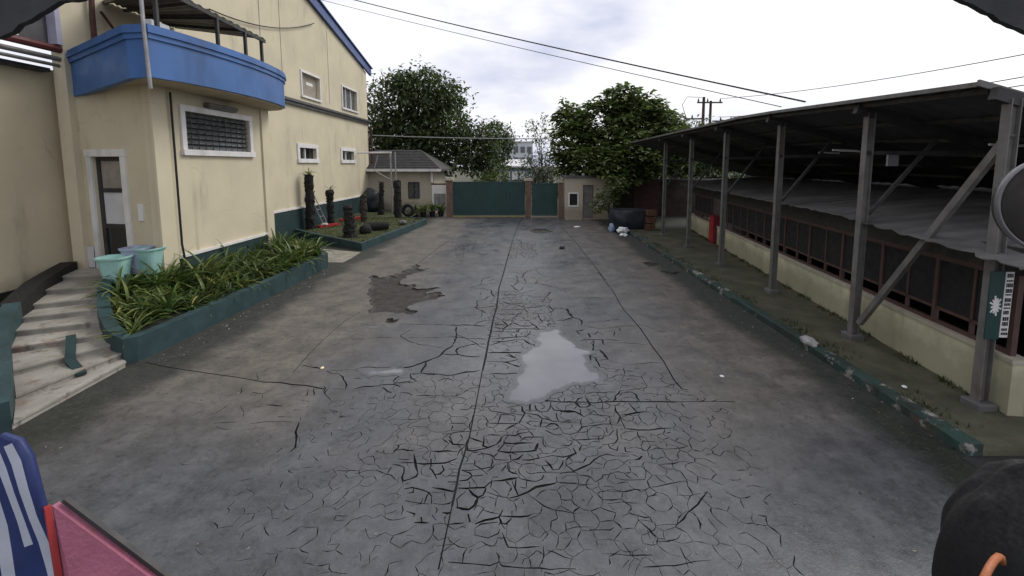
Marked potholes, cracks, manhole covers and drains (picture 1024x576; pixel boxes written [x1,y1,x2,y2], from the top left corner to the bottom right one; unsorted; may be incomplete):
crack [183,227,662,465]
crack [195,364,804,576]
